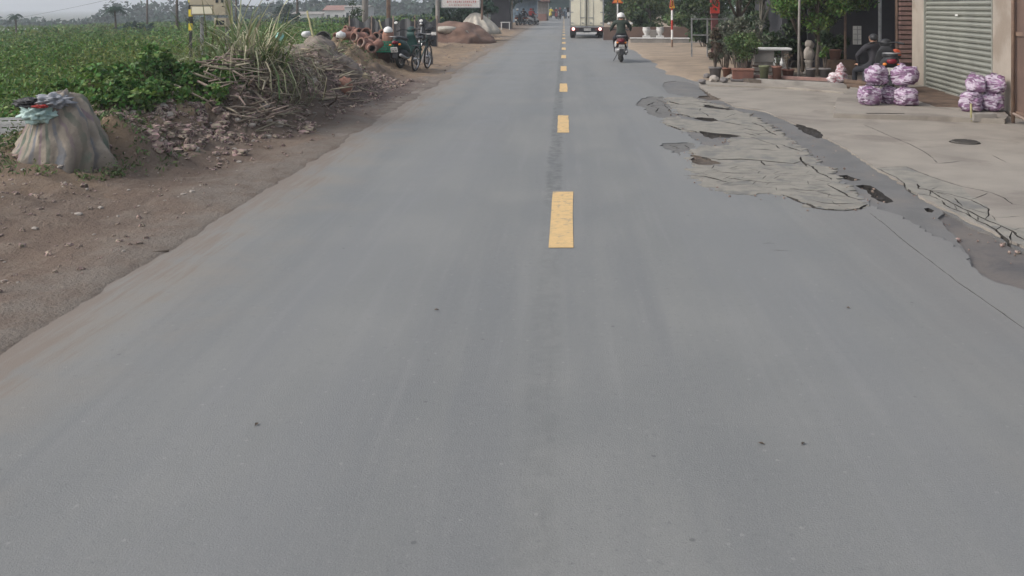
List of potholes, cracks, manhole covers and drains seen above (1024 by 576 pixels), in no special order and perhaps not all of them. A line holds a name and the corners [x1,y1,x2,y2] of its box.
pothole [856,185,893,203]
pothole [794,124,823,138]
pothole [699,131,739,139]
crack [648,100,1023,328]
pothole [690,155,720,165]
